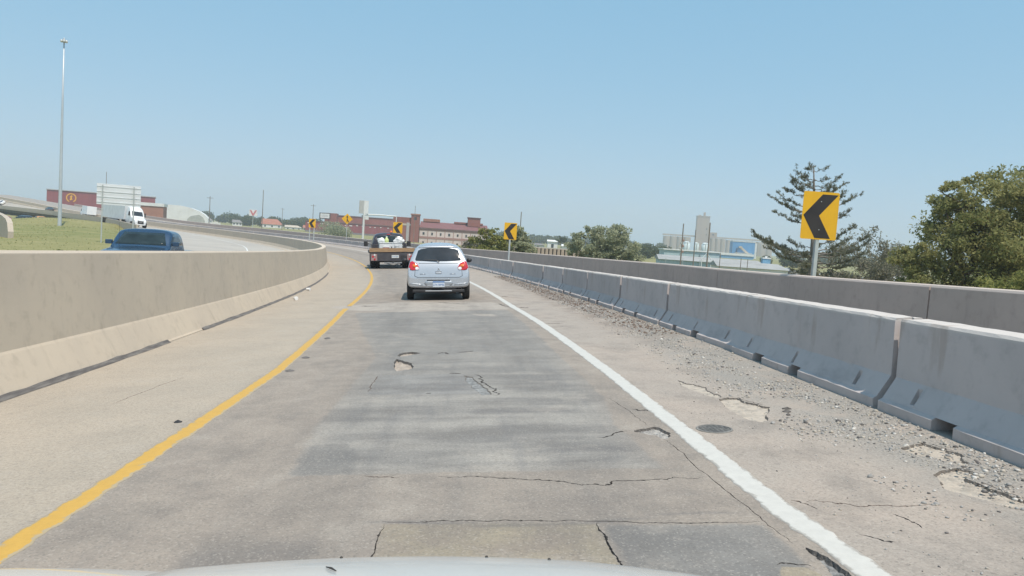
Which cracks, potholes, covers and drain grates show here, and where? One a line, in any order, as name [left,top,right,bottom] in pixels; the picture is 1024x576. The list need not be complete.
crack [370,520,760,565]
crack [440,440,792,543]
pothole [933,468,1024,509]
pothole [719,397,770,422]
manhole cover [696,424,733,434]
pothole [634,427,671,439]
crack [791,500,930,528]
pothole [394,359,414,371]
crack [452,373,500,396]
